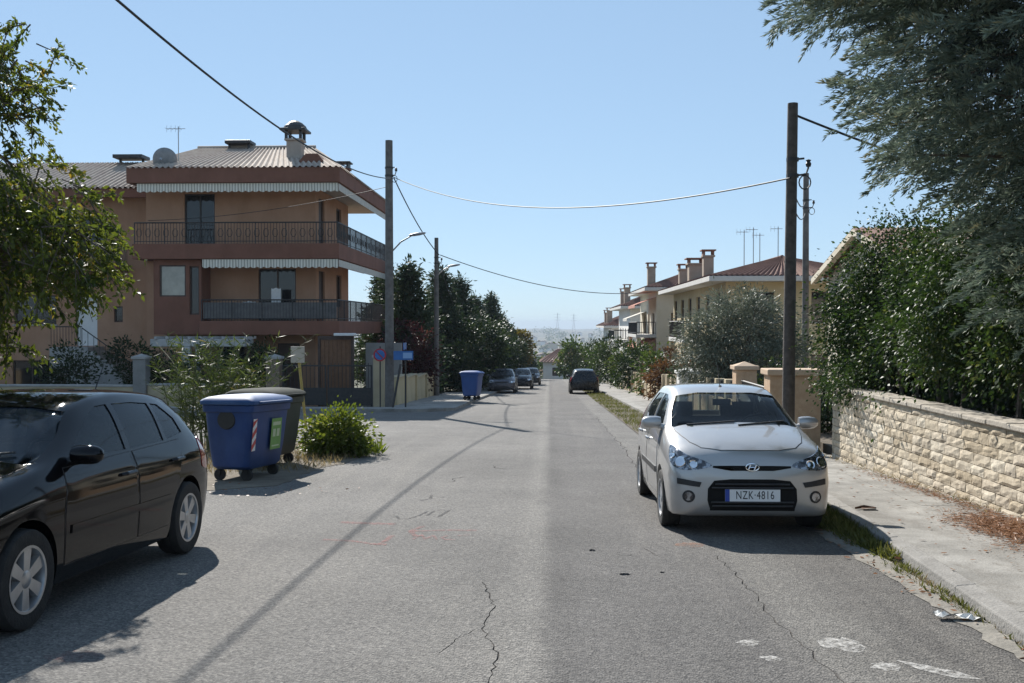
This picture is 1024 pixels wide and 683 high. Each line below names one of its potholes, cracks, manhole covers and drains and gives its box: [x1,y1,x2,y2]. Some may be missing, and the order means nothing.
crack [716,555,845,683]
crack [440,582,499,683]
